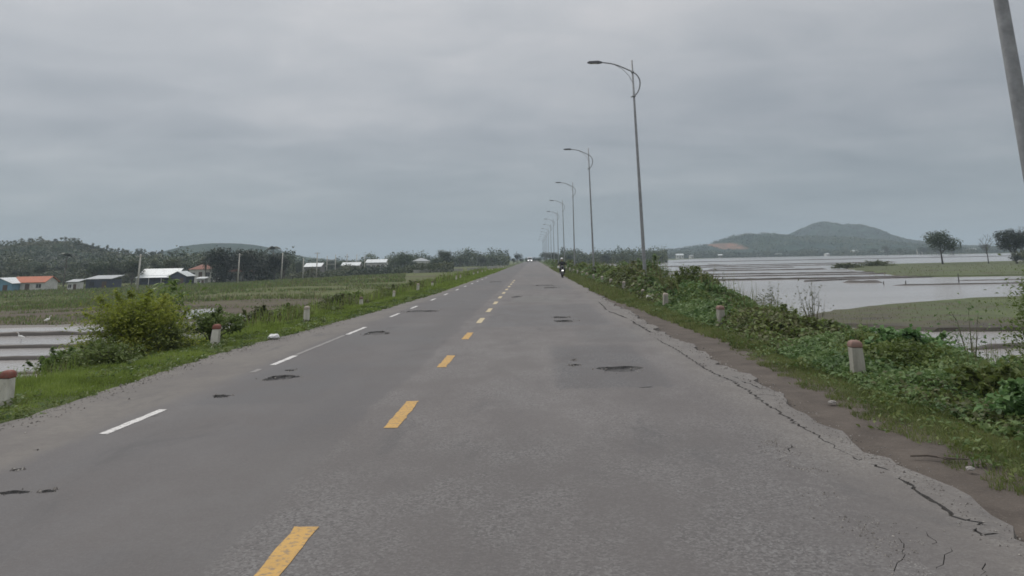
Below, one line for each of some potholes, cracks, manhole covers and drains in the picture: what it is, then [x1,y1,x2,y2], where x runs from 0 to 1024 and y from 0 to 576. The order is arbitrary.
crack [599,302,998,575]
